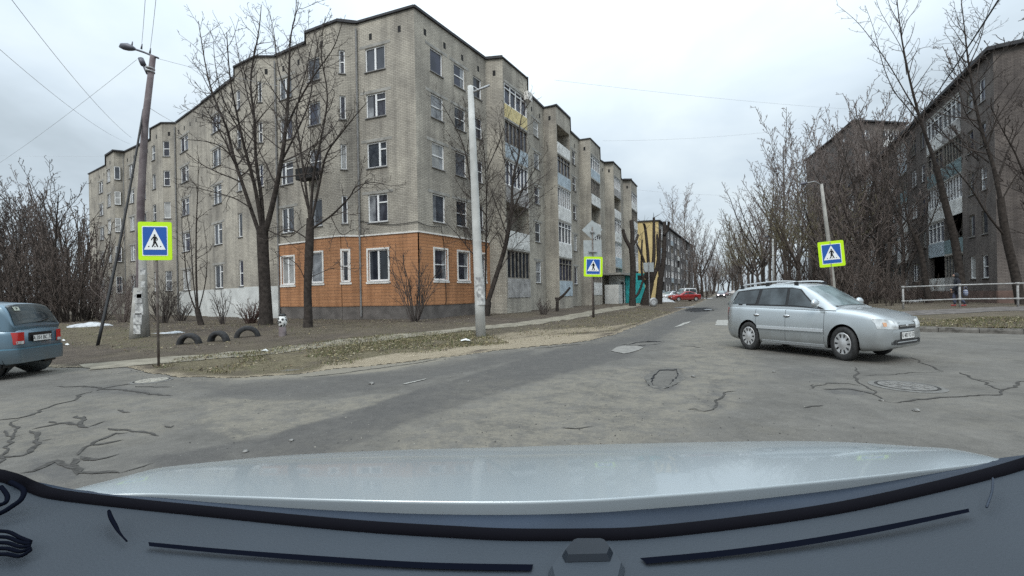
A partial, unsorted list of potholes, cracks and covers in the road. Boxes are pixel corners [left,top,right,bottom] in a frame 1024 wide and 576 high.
pothole [644,368,685,390]
crack [698,391,731,411]
crack [804,357,1020,408]
crack [0,383,174,475]
manhole cover [868,380,949,393]
